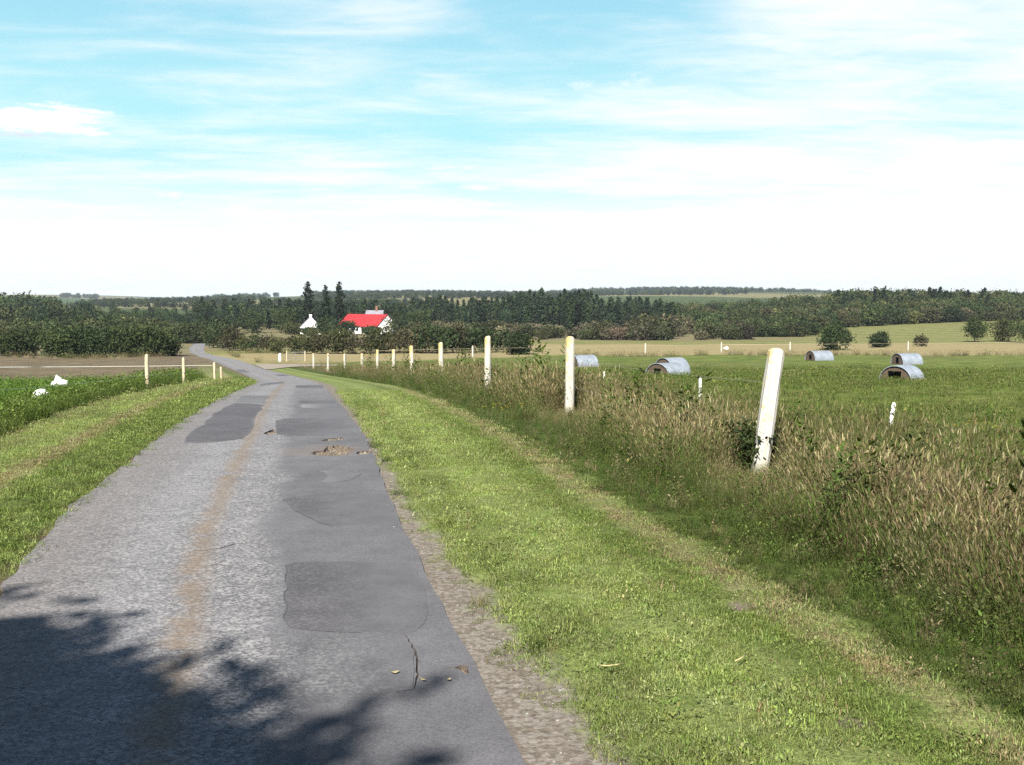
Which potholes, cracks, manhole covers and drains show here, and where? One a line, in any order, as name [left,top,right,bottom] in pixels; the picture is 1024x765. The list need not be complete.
crack [404,634,419,688]
crack [192,543,263,567]
pothole [312,445,354,456]
